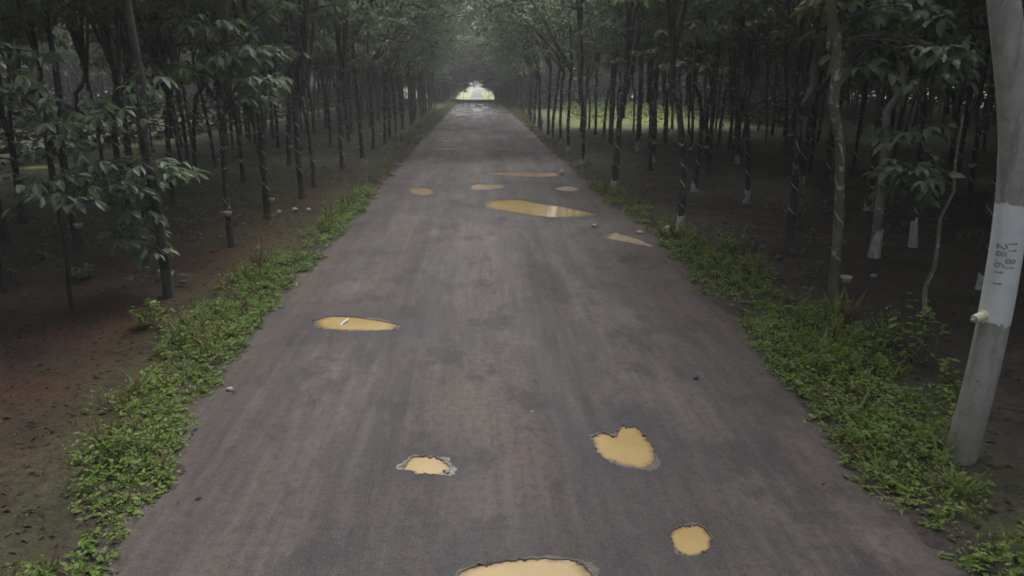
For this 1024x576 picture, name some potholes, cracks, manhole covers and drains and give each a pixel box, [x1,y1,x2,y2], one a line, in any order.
pothole [408,187,435,195]
pothole [588,423,661,471]
pothole [395,454,457,476]
pothole [312,315,399,331]
pothole [455,555,601,576]
pothole [484,199,598,217]
pothole [669,522,713,556]
pothole [604,232,655,247]
